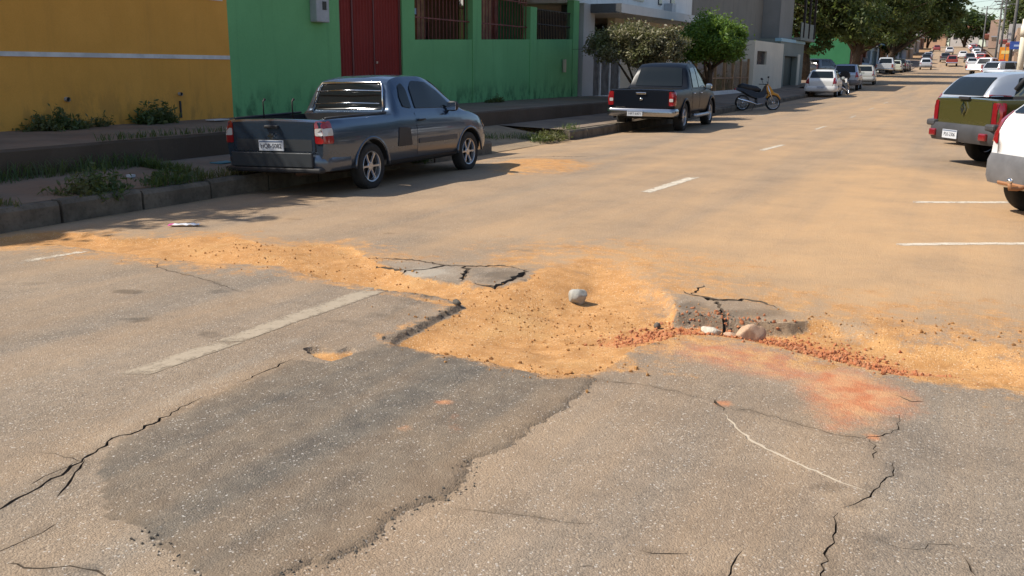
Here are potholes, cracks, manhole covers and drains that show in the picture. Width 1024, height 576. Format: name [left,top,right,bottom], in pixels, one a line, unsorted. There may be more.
crack [609,381,924,576]
pothole [303,346,358,362]
crack [376,258,529,289]
crack [459,508,689,554]
crack [0,397,202,576]
